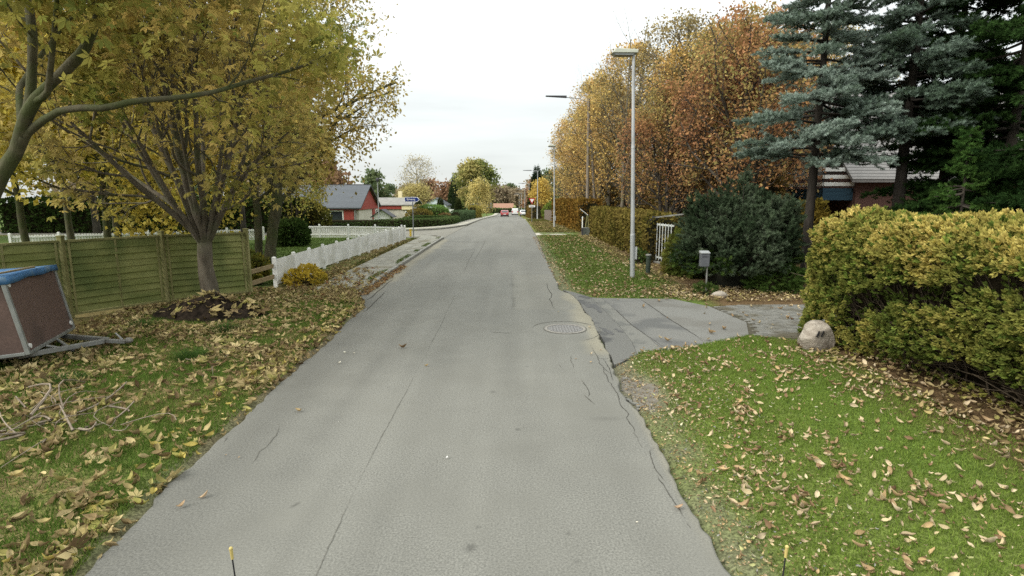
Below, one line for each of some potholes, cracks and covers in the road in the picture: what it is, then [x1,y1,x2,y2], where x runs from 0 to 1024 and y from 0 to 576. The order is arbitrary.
manhole cover [543,324,587,334]
crack [534,286,638,438]
